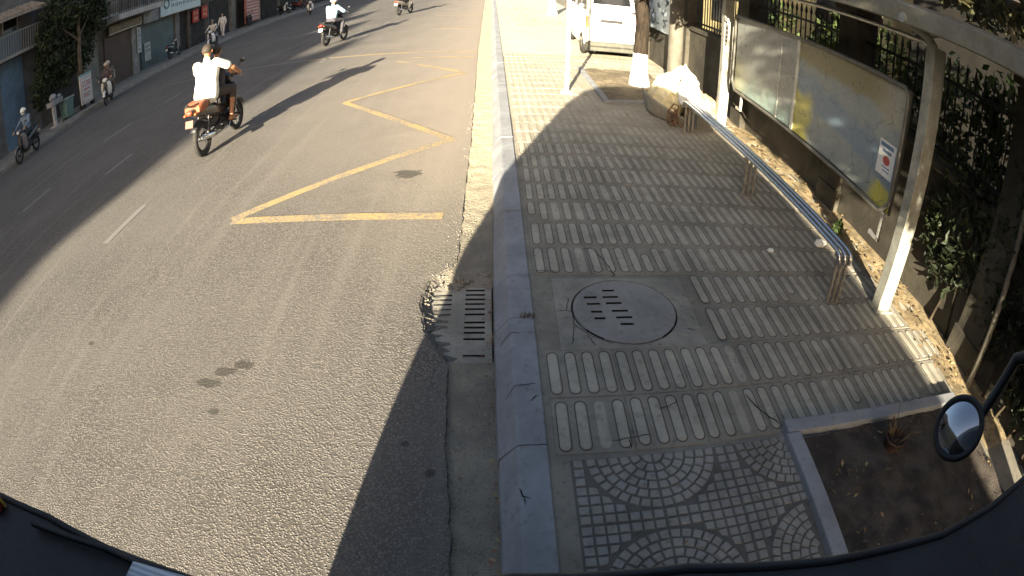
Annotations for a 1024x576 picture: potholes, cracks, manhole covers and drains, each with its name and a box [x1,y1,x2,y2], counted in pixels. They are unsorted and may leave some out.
drain grate [430,288,492,363]
manhole cover [551,278,708,351]
